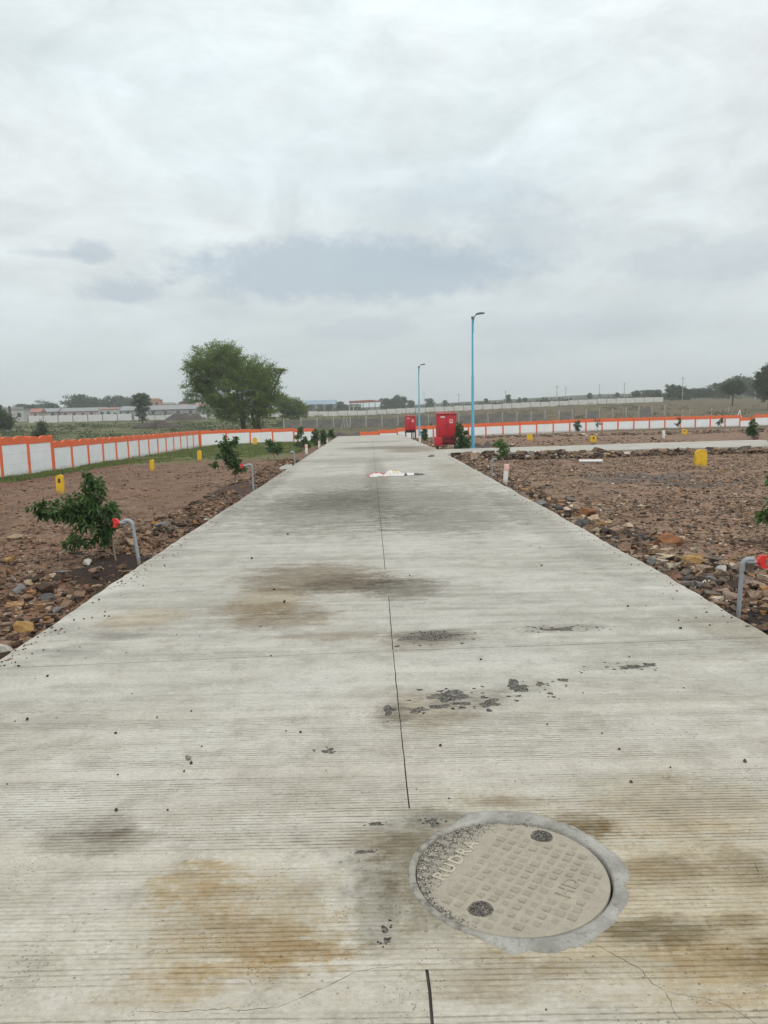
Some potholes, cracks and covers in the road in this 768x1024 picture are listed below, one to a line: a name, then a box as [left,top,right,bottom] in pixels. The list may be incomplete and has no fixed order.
crack [597,945,754,1023]
crack [137,966,392,1013]
manhole cover [408,810,631,955]
